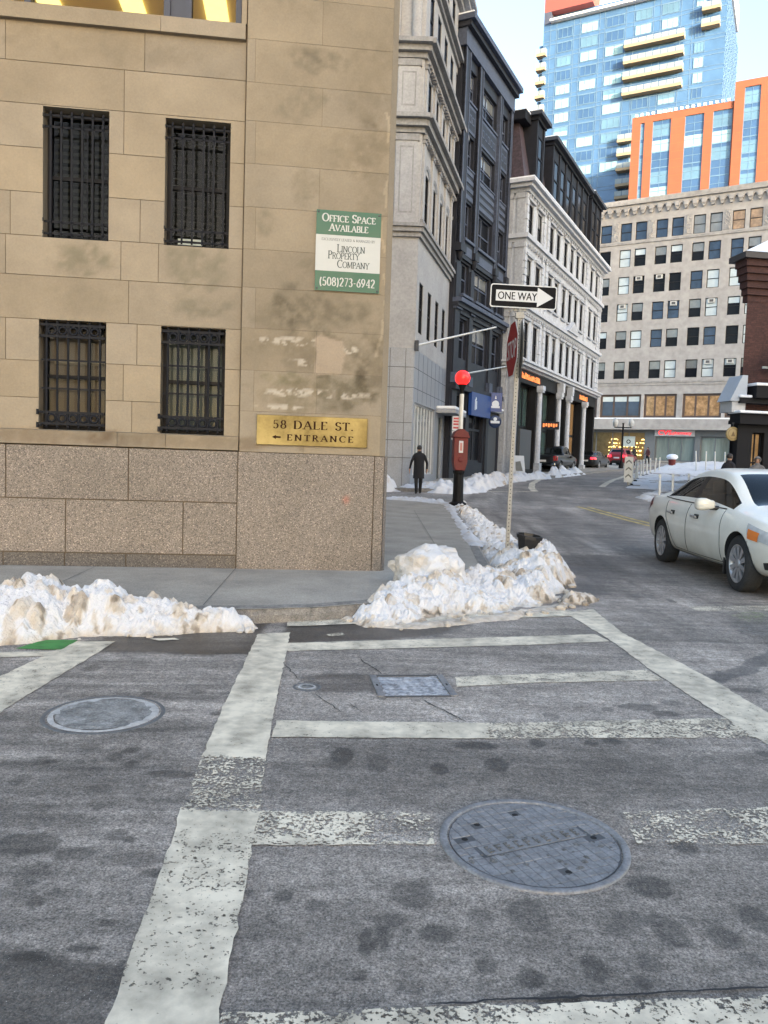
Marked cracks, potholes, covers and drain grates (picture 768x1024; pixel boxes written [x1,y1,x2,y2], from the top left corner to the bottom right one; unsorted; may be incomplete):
utility cover [293,683,321,691]
manhole cover [40,696,165,735]
manhole cover [440,799,631,895]
